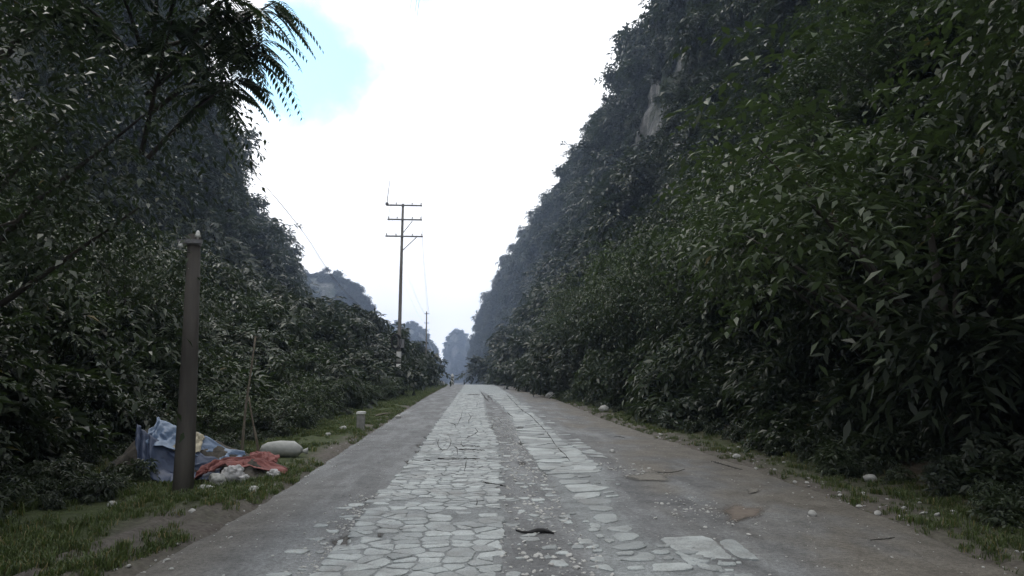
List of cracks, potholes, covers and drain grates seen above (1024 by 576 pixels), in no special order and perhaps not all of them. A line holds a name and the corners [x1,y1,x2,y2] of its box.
crack [412,392,570,471]
